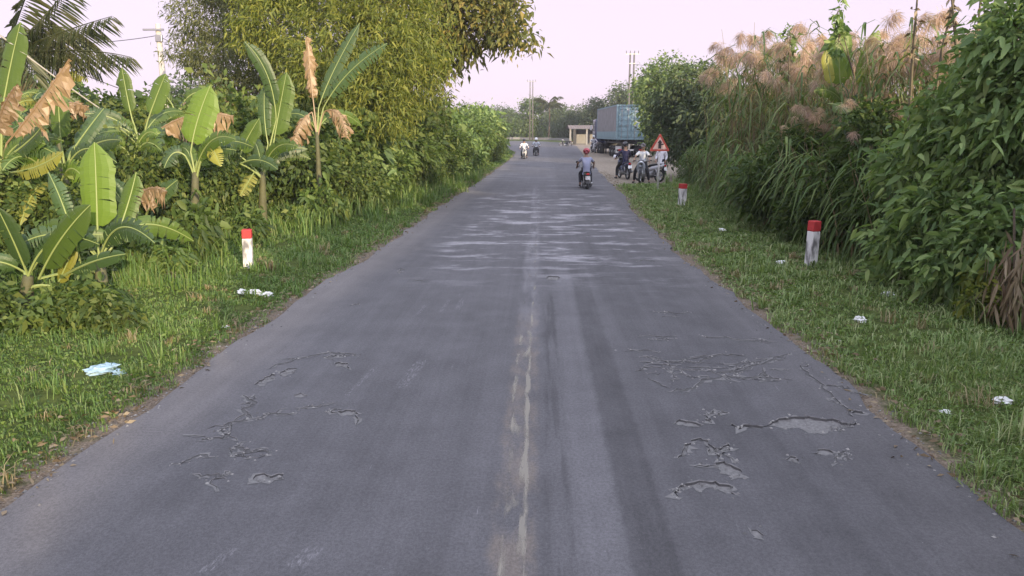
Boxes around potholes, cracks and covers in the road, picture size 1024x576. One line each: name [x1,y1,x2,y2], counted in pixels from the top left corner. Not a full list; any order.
crack [170,394,334,492]
crack [623,335,868,417]
pothole [812,448,839,456]
crack [271,352,358,368]
pothole [716,461,749,480]
pothole [731,415,857,435]
pothole [676,437,739,468]
pothole [665,480,740,500]
pothole [247,473,284,484]
pothole [254,372,275,387]
